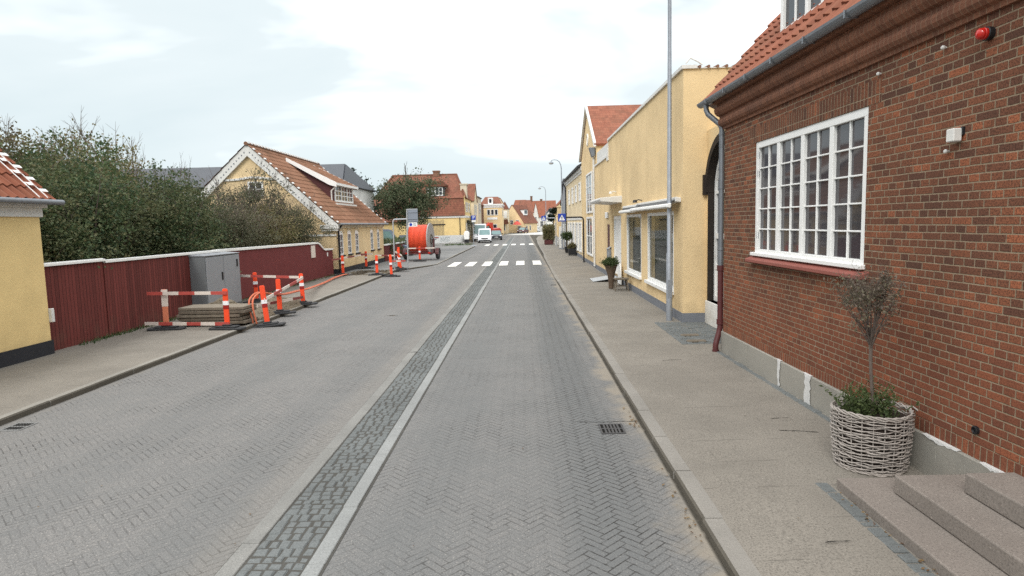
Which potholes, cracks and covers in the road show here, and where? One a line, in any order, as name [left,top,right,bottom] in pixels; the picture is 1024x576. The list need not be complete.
drain grate [598,423,626,434]
drain grate [0,422,38,431]
